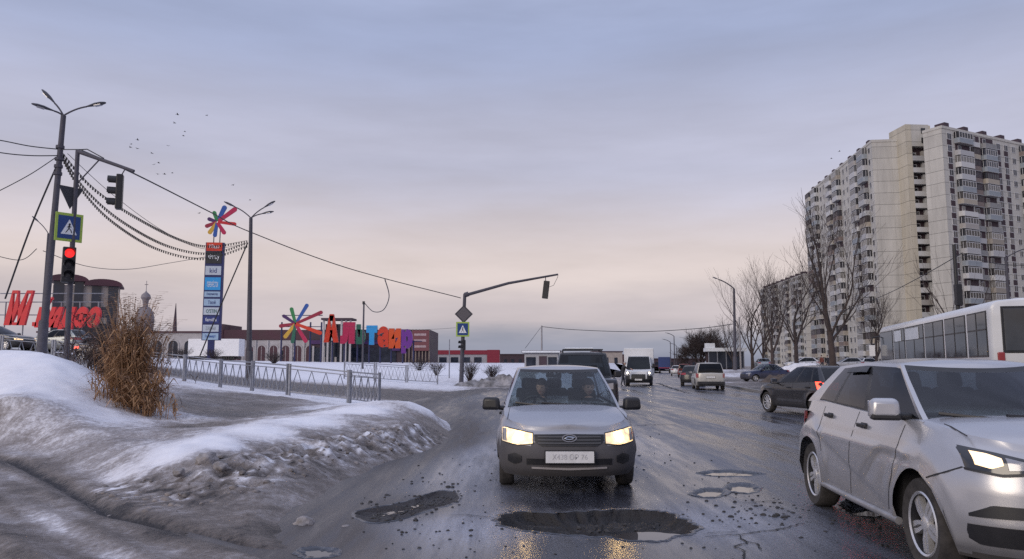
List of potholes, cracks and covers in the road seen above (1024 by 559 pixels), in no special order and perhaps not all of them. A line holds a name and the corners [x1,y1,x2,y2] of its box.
pothole [351,490,462,524]
pothole [695,469,766,477]
pothole [687,487,731,498]
pothole [723,482,764,494]
pothole [491,508,704,542]
pothole [292,546,342,559]
crack [706,523,802,559]
